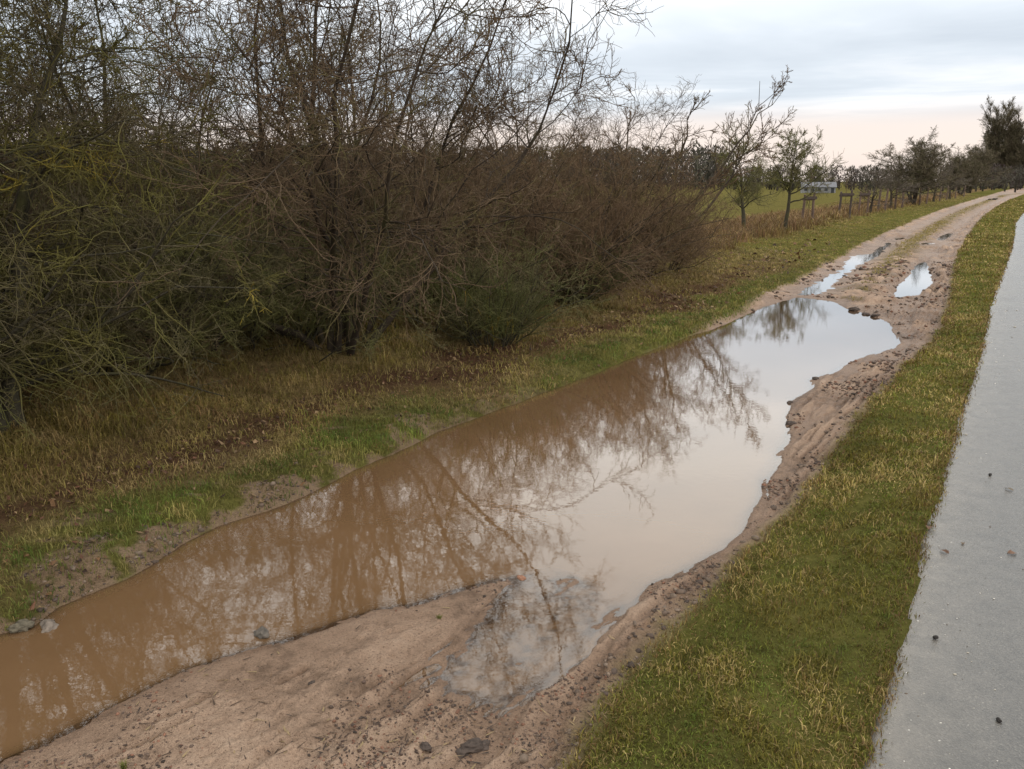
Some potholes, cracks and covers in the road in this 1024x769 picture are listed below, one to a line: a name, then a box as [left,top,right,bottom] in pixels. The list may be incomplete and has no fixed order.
pothole [882,255,943,298]
